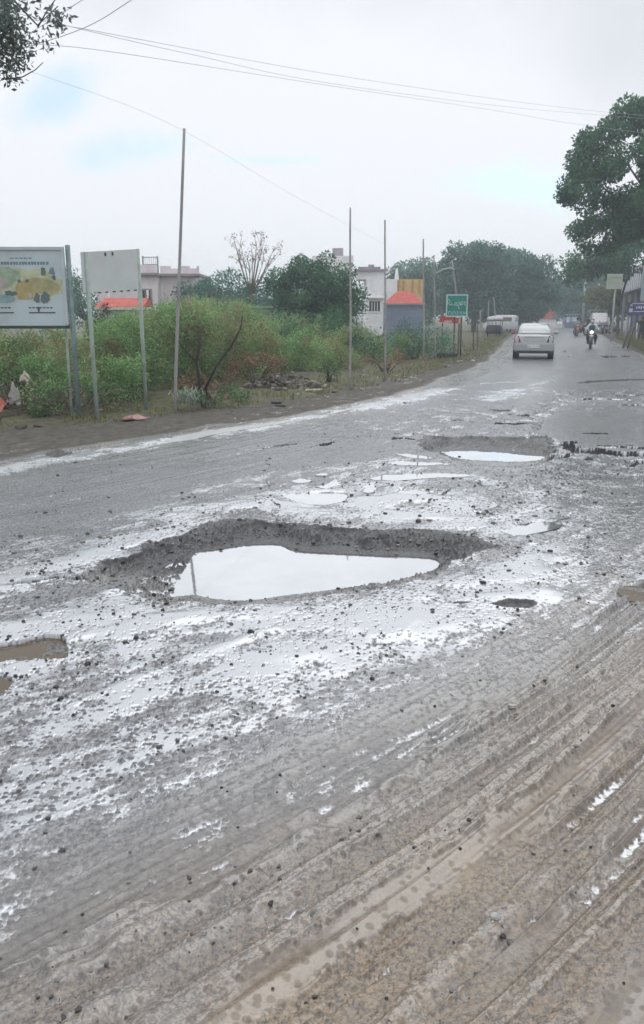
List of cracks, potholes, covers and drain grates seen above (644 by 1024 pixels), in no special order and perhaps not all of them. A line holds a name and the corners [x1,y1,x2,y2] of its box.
pothole [616,583,644,603]
pothole [79,518,502,606]
pothole [417,435,558,467]
pothole [489,597,538,609]
pothole [0,633,69,662]
